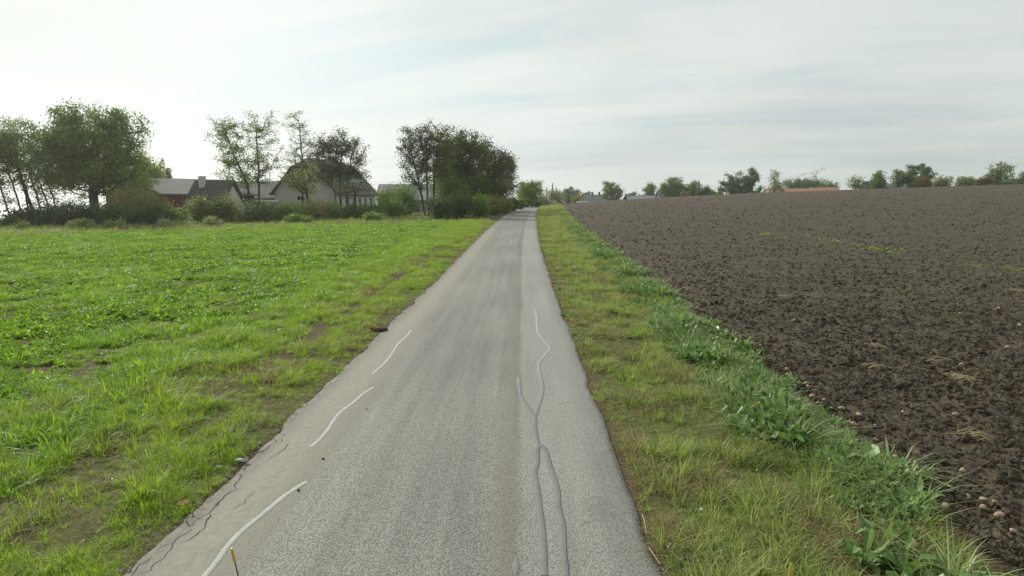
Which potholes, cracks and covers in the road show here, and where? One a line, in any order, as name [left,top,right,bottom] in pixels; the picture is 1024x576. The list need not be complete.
crack [131,438,289,576]
